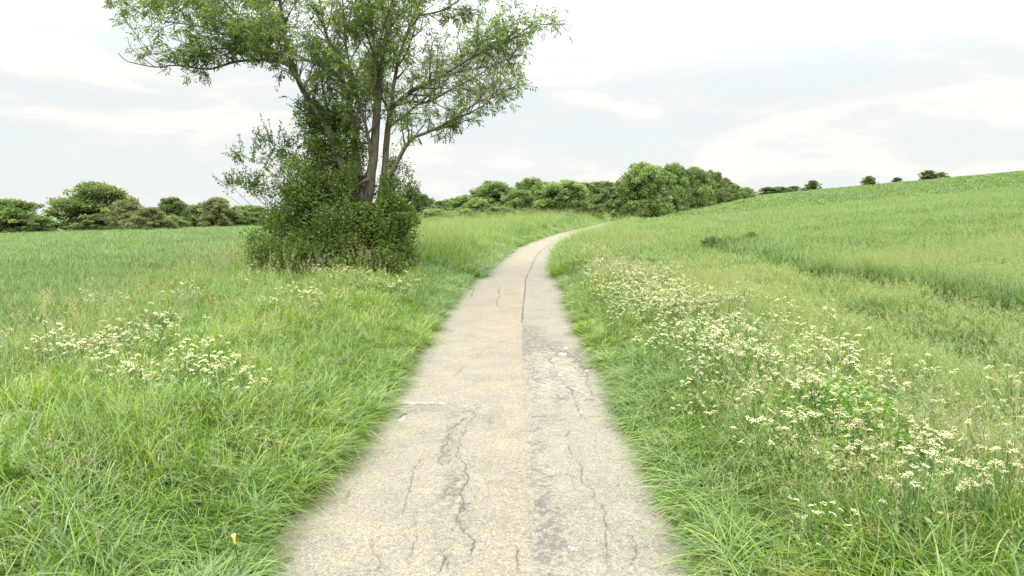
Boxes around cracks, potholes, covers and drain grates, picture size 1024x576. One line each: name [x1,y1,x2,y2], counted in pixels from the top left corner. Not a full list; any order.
crack [555,432,608,567]
crack [396,404,475,559]
